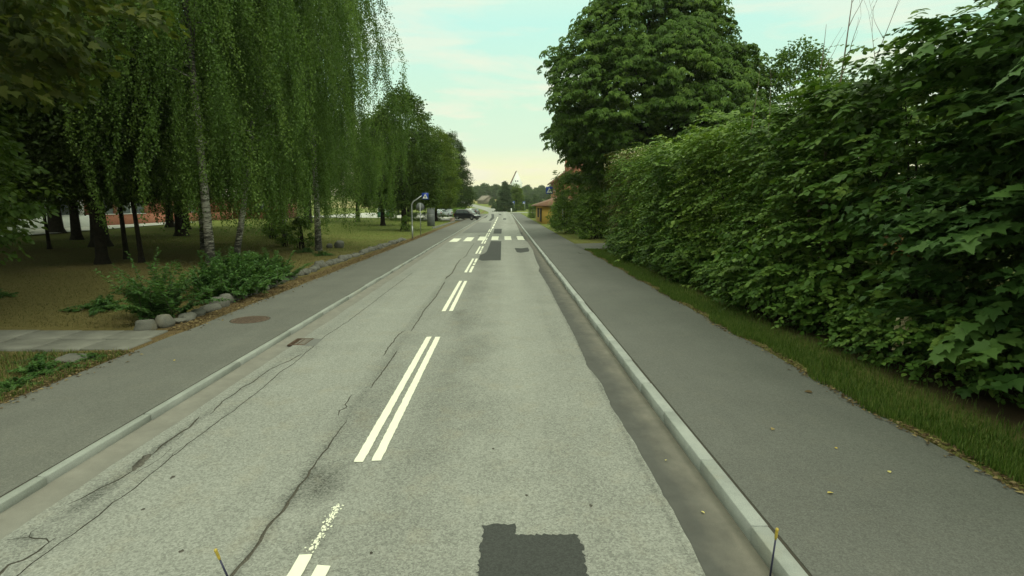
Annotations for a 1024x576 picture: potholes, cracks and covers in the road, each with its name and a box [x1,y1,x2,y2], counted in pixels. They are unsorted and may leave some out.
manhole cover [229,316,270,324]
crack [0,273,412,576]
drain grate [287,338,314,346]
crack [372,235,480,386]
